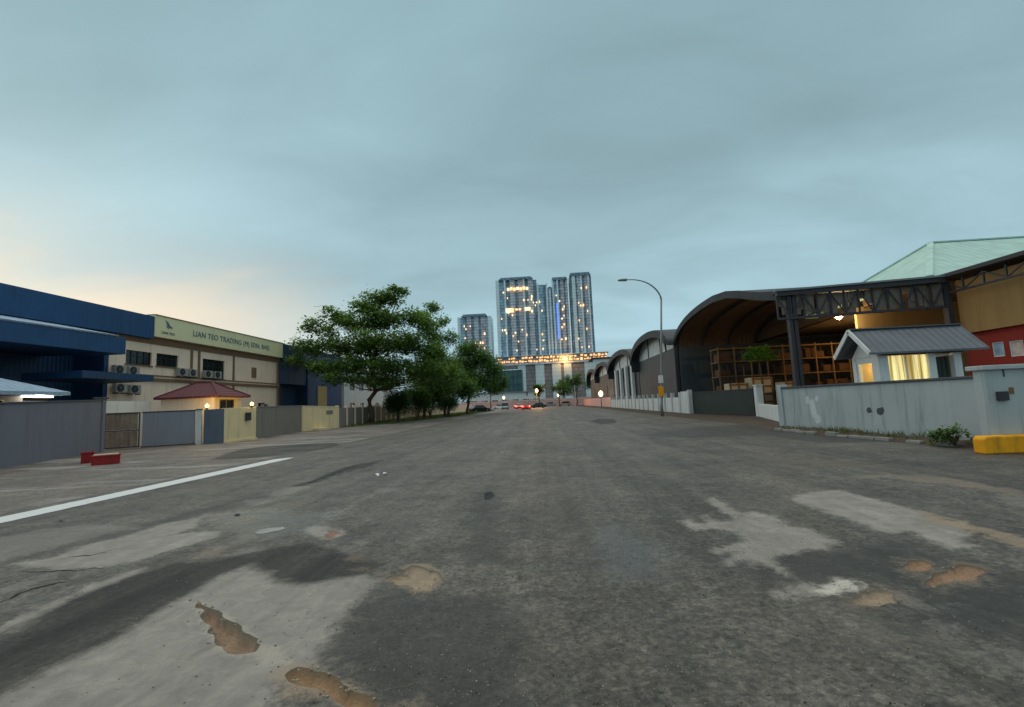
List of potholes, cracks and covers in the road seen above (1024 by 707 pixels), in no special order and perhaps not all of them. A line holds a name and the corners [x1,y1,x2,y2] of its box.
pothole [189,599,262,655]
pothole [385,565,444,590]
pothole [323,529,341,539]
pothole [924,564,987,589]
crack [0,550,111,603]
pothole [901,559,944,571]
pothole [848,587,898,606]
pothole [285,666,378,707]
